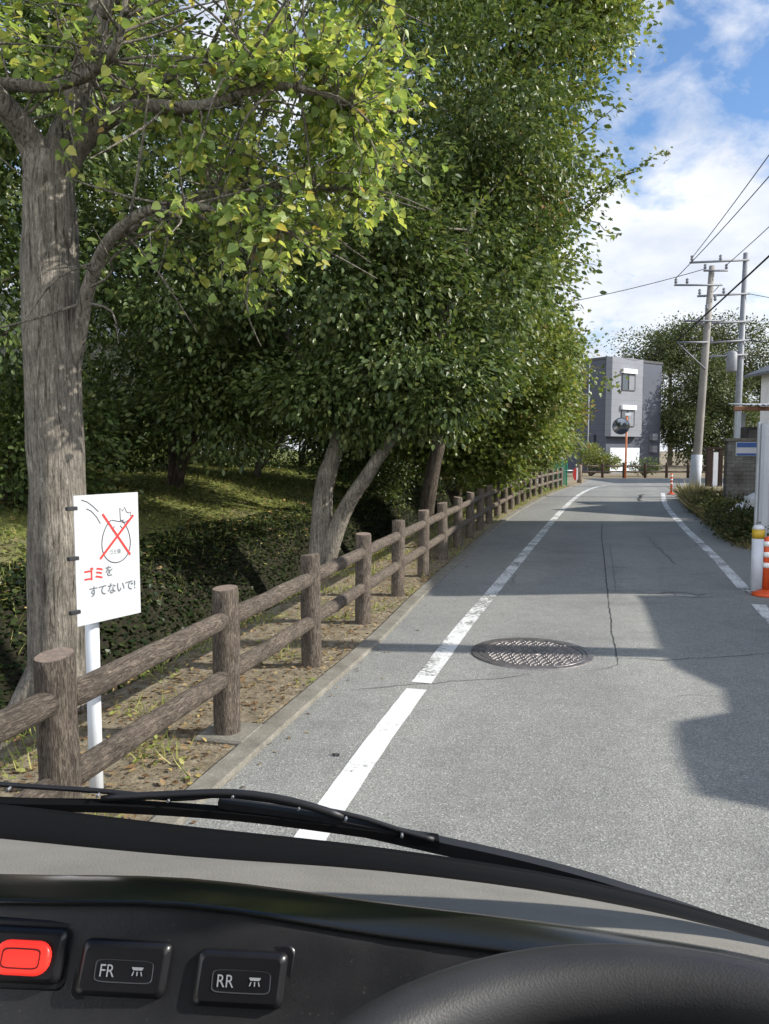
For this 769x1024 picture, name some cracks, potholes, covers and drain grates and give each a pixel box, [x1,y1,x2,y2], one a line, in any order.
manhole cover [471,637,594,670]
